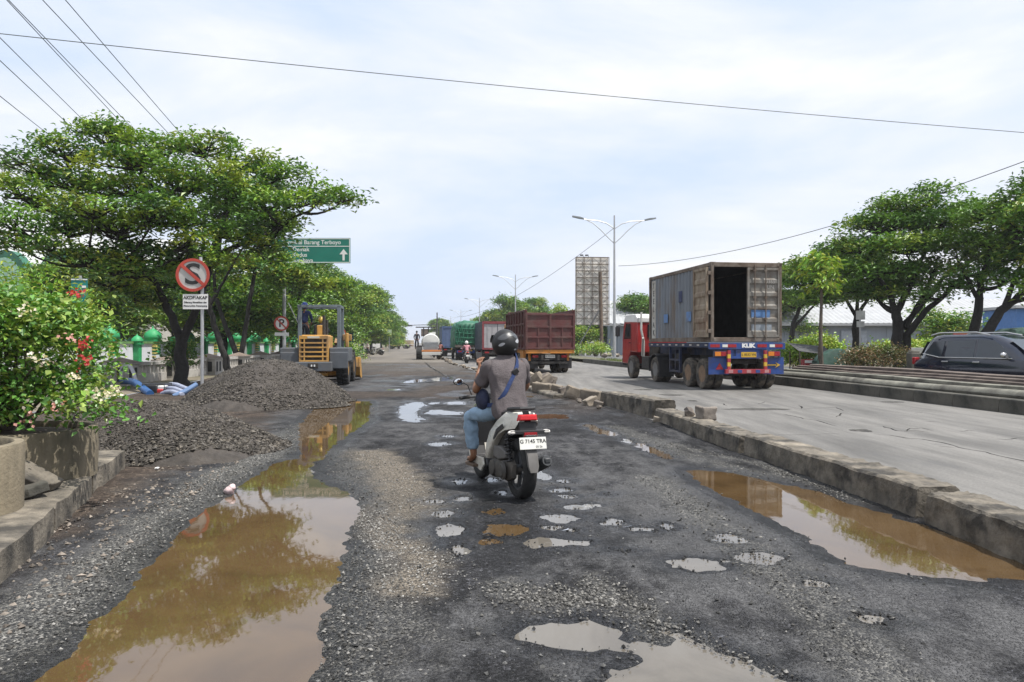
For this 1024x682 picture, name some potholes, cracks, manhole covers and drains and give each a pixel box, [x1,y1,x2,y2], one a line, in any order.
pothole [673,466,1024,589]
pothole [429,521,470,539]
pothole [395,401,430,423]
pothole [0,400,379,682]
pothole [519,534,597,549]
pothole [553,502,607,510]
pothole [479,521,539,538]
pothole [662,555,735,574]
pothole [496,613,815,682]
pothole [534,512,590,524]
crack [880,421,1023,461]
